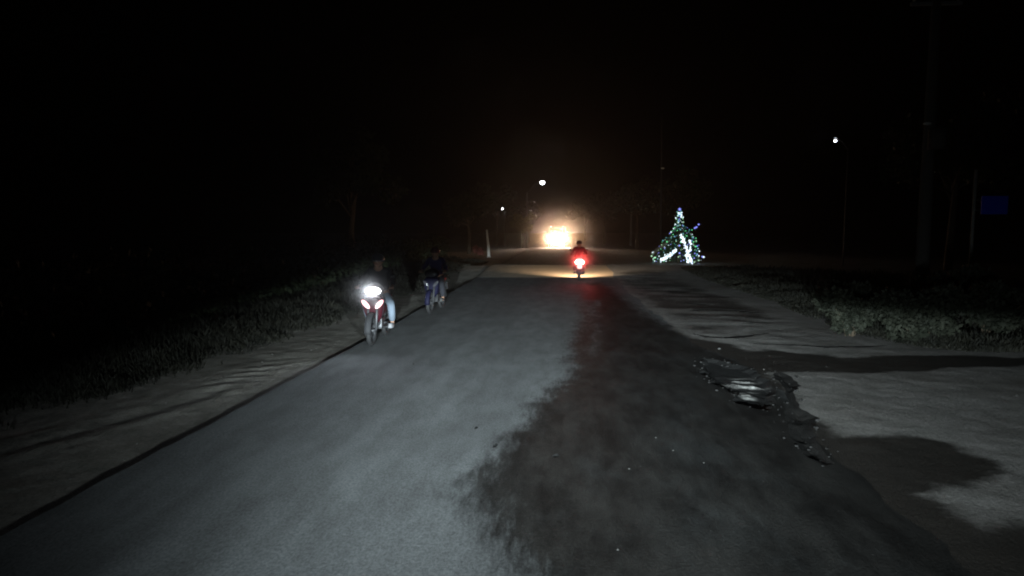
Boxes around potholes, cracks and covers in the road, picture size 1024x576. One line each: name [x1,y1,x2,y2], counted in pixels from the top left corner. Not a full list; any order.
pothole [699,358,777,411]
pothole [773,372,835,465]
